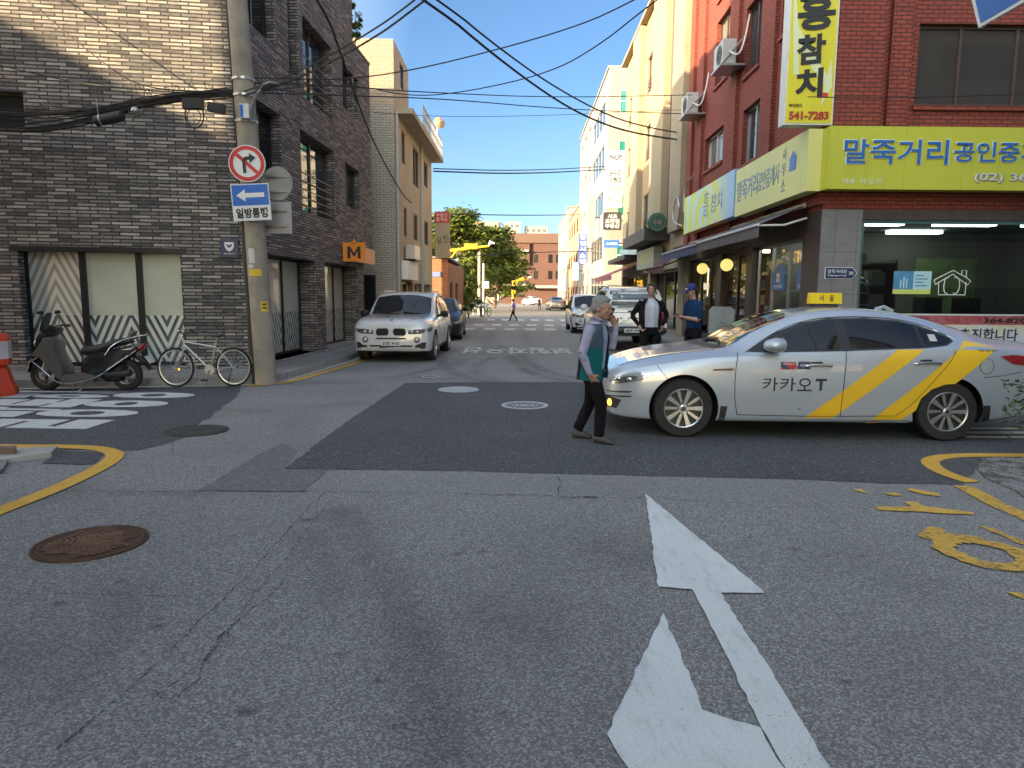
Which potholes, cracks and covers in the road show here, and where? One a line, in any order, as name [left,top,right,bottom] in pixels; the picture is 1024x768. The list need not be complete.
manhole cover [29,525,149,563]
crack [62,475,737,503]
manhole cover [501,401,548,409]
manhole cover [164,424,229,437]
crack [50,492,331,756]
